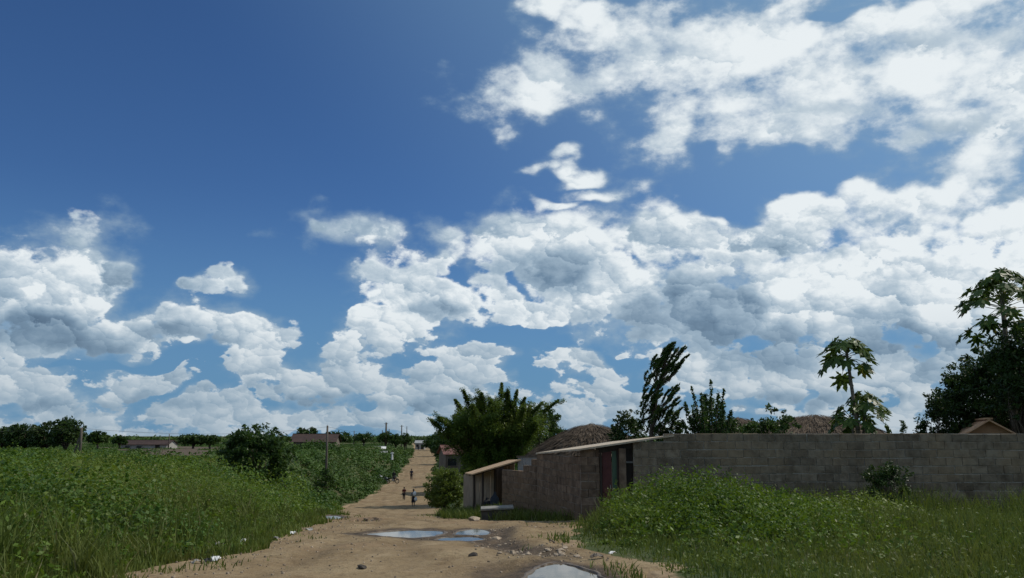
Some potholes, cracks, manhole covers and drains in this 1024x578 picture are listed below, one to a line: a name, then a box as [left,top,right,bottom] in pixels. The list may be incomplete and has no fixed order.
pothole [351,529,448,538]
pothole [521,562,606,578]
